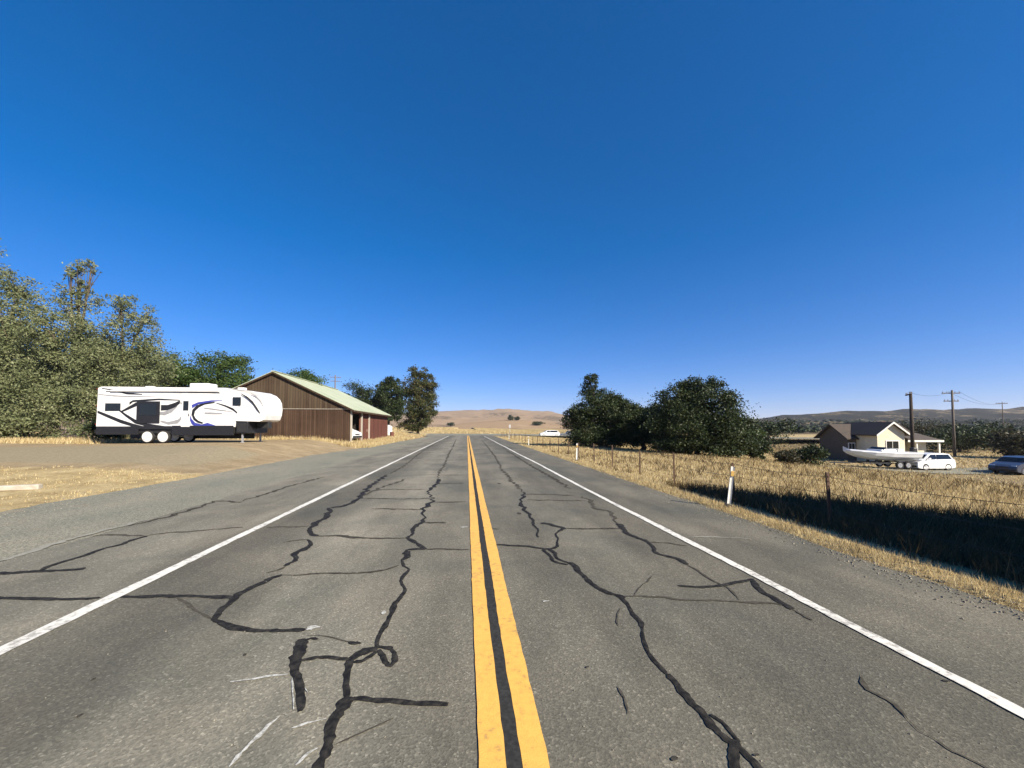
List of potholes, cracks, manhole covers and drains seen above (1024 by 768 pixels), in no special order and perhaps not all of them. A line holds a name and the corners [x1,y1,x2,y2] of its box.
crack [482,440,812,743]
crack [0,527,241,575]
crack [859,675,988,768]
crack [120,440,469,768]
